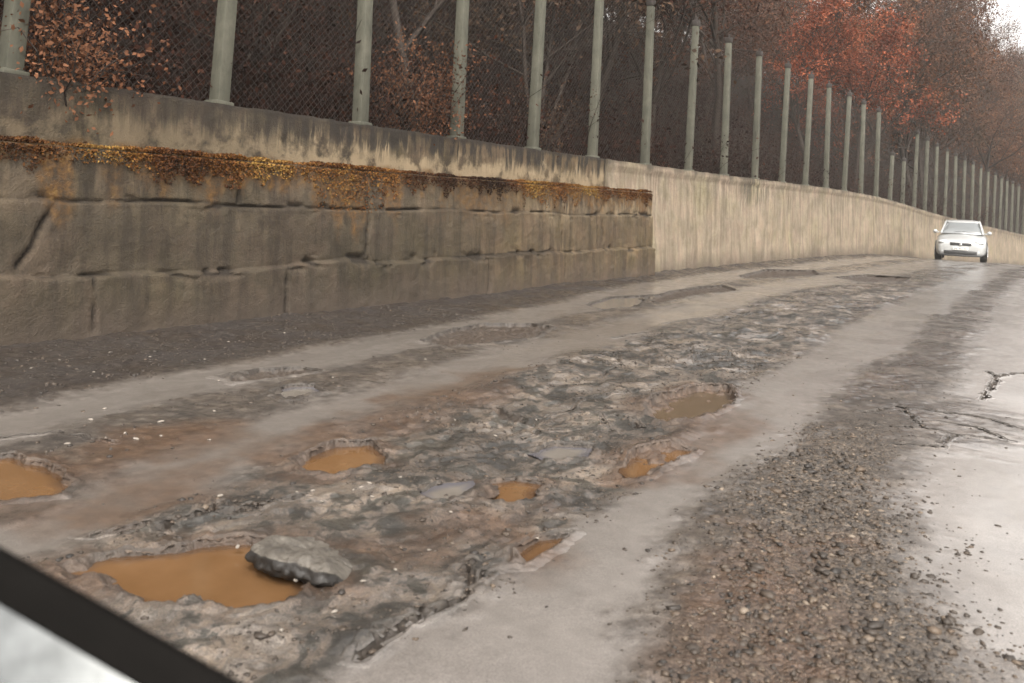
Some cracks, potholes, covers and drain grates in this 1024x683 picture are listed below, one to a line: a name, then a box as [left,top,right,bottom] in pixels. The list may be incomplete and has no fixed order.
pothole [0,449,82,505]
pothole [274,436,396,480]
pothole [606,437,705,486]
pothole [636,382,745,426]
pothole [415,322,557,349]
pothole [736,269,821,279]
pothole [483,527,587,577]
pothole [584,294,656,310]
pothole [461,475,554,511]
pothole [41,528,323,618]
crack [850,371,1024,450]
pothole [832,274,912,283]
